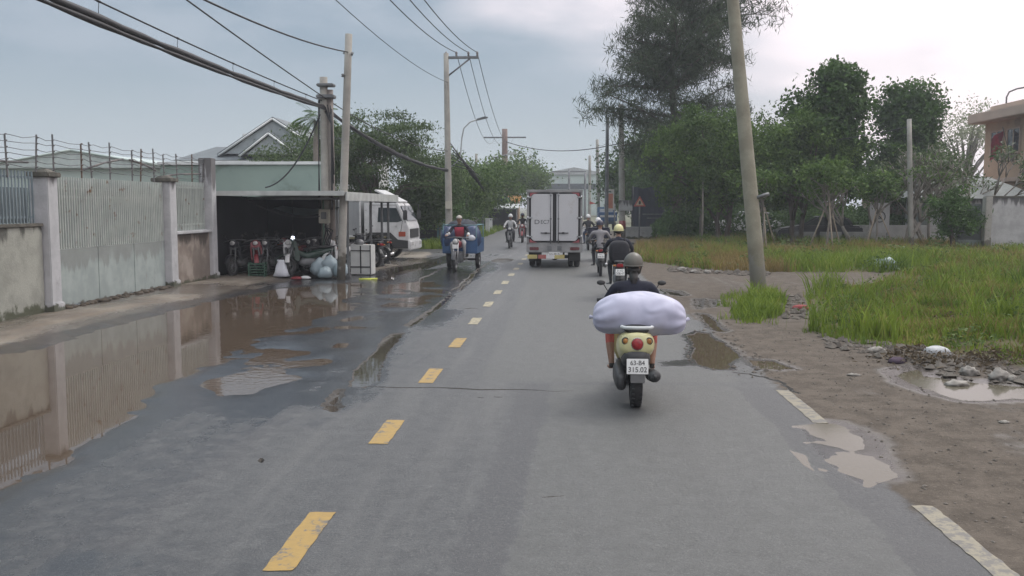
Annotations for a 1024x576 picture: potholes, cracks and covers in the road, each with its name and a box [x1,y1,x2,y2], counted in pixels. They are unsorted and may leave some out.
pothole [348,333,405,388]
pothole [686,331,741,370]
crack [364,386,557,398]
pothole [320,389,346,412]
